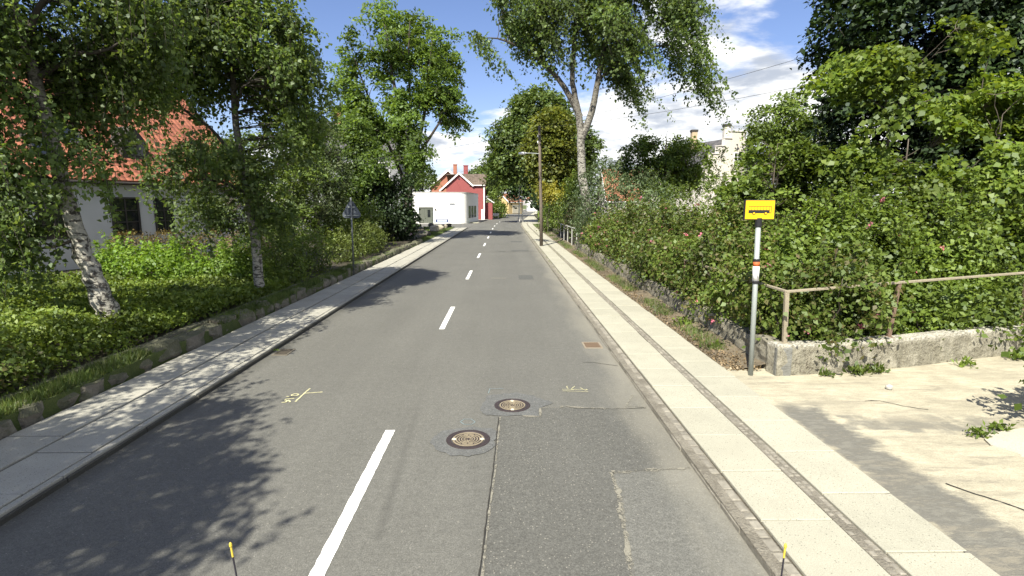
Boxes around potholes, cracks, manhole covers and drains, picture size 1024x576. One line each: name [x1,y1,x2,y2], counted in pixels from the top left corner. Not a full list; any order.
manhole cover [446,430,490,449]
manhole cover [494,399,530,412]
crack [945,483,1024,510]
